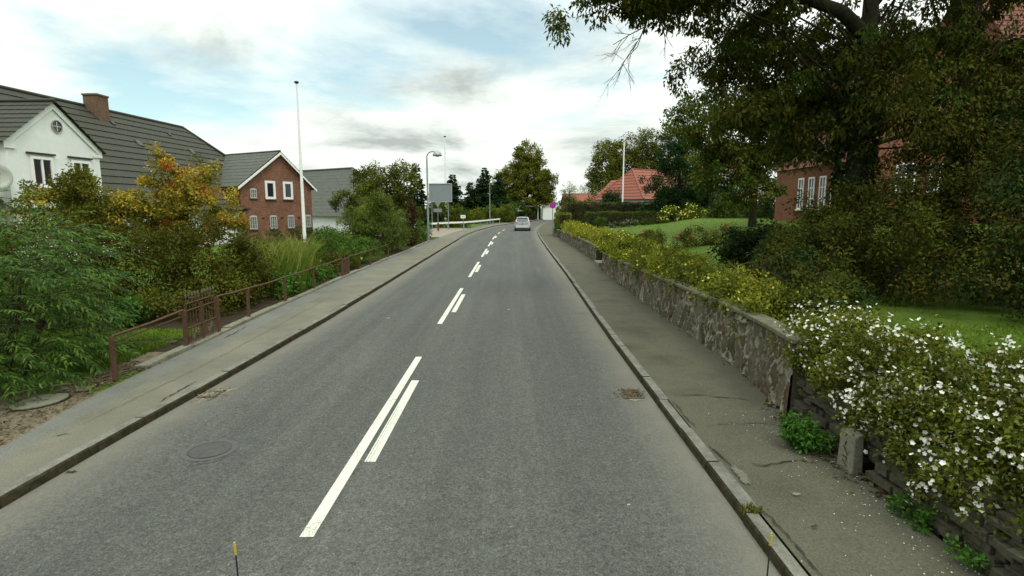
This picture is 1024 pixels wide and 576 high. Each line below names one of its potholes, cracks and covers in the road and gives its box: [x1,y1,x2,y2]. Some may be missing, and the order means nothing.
manhole cover [6,393,72,411]
drain grate [614,388,647,399]
manhole cover [180,439,238,461]
